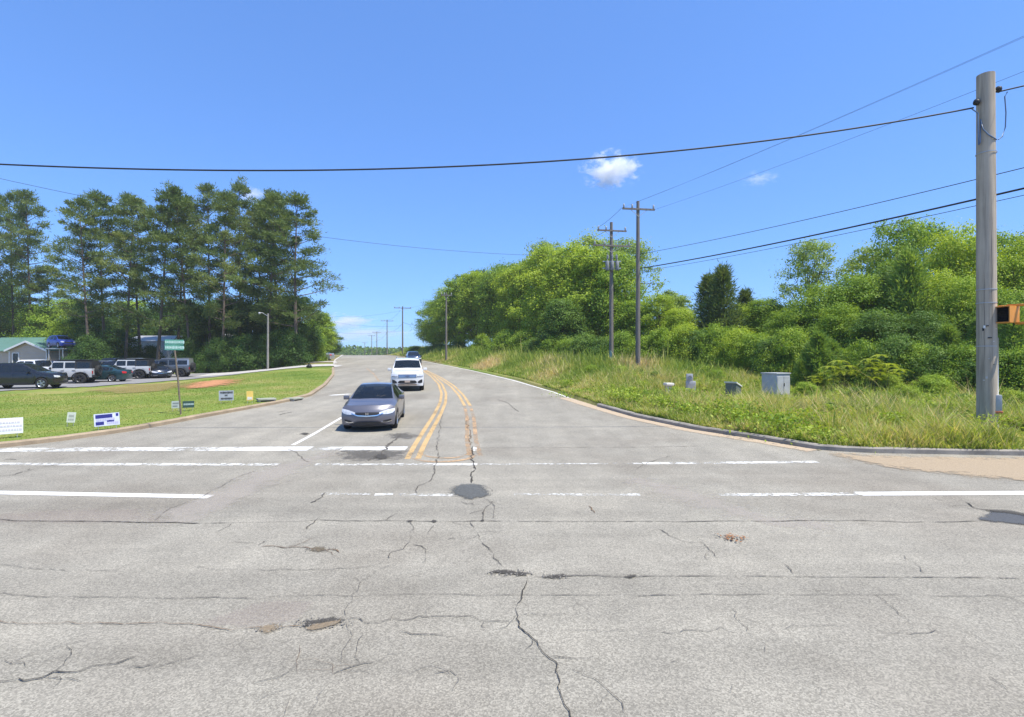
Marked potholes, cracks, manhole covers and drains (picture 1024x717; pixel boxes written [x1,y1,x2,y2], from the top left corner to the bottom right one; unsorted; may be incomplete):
crack [0,641,201,689]
crack [217,419,713,717]
pothole [302,616,345,629]
